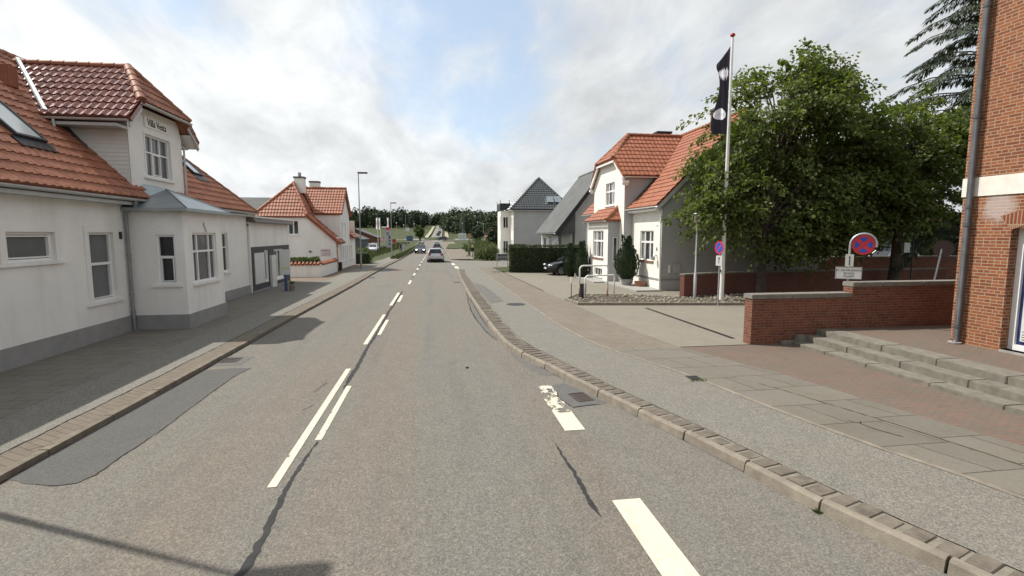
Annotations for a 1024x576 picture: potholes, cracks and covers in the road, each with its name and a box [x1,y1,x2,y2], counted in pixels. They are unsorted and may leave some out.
drain grate [567,392,594,402]
